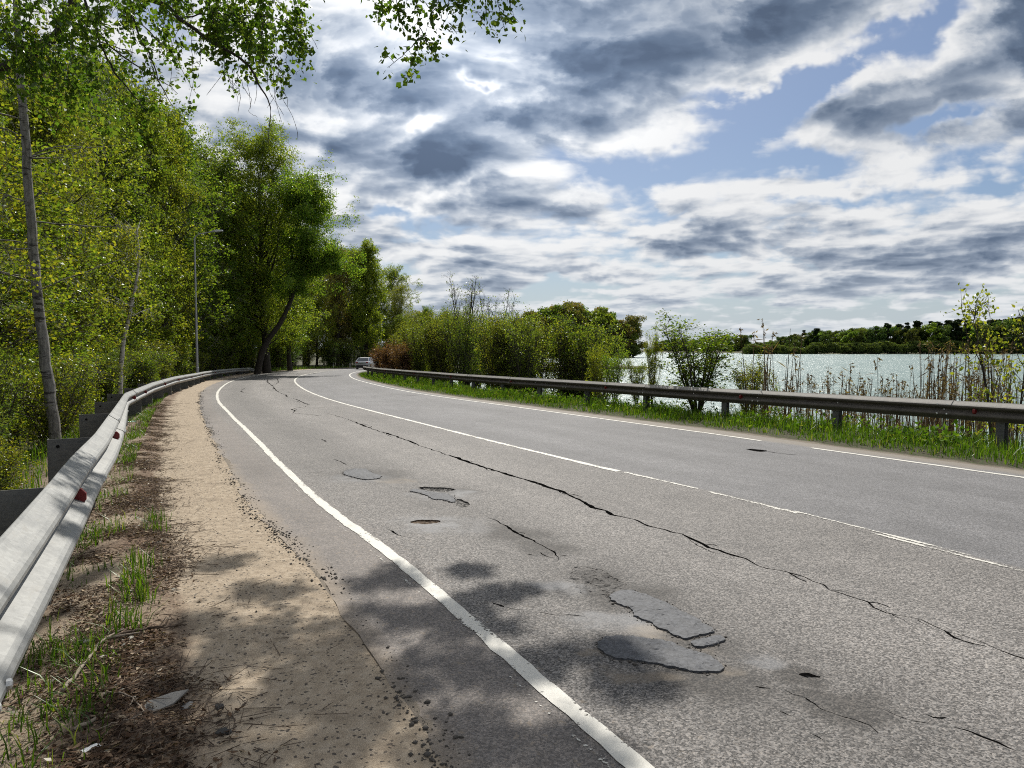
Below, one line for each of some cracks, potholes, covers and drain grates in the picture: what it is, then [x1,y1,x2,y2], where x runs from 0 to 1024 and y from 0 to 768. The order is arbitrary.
crack [756,686,1016,751]
pothole [410,489,456,503]
crack [267,379,318,416]
crack [335,415,1024,659]
